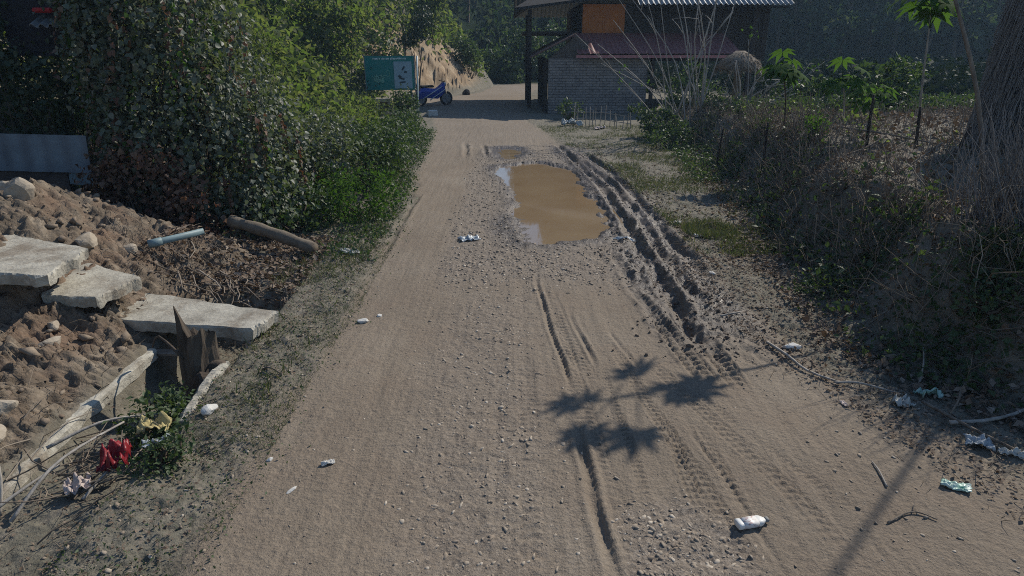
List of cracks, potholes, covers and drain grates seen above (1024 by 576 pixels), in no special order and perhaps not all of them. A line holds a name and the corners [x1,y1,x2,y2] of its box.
pothole [483,145,534,161]
pothole [485,160,627,248]
